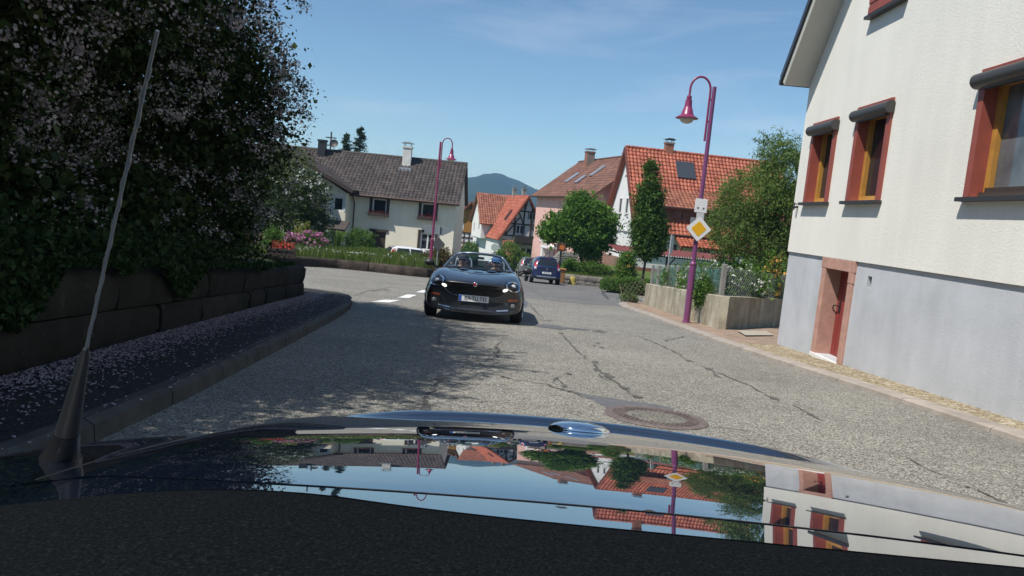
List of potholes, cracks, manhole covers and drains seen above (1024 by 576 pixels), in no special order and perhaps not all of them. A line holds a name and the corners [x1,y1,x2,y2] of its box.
crack [904,456,1008,504]
crack [472,342,584,398]
crack [592,361,635,397]
crack [642,336,819,419]
manhole cover [604,405,709,430]
